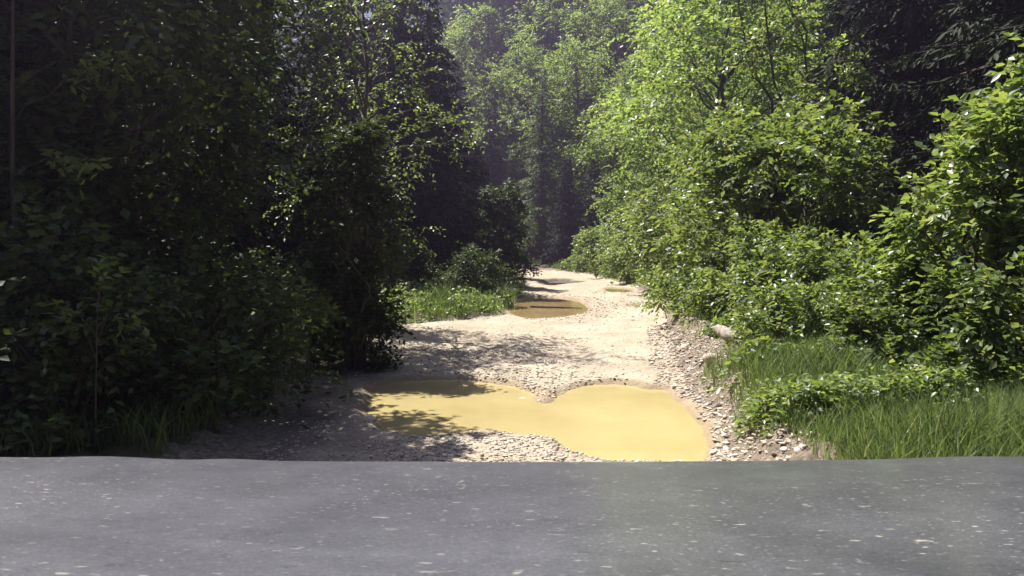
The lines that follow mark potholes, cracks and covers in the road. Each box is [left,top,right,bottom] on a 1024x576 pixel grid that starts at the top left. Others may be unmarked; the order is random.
pothole [505,295,594,319]
pothole [351,374,728,462]
